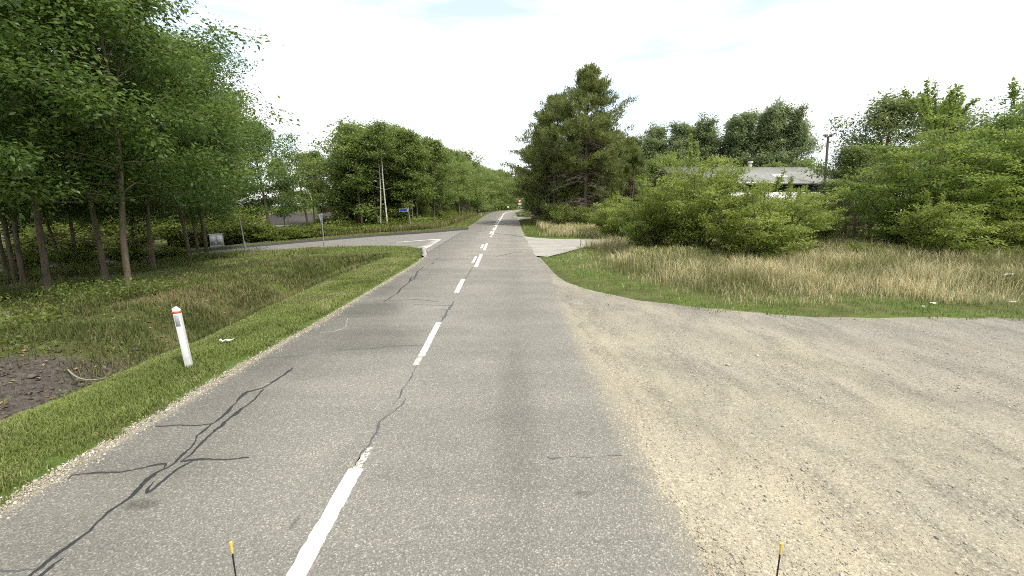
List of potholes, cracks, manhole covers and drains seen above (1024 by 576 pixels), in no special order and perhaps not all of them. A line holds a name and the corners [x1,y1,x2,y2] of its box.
crack [373,286,454,322]
